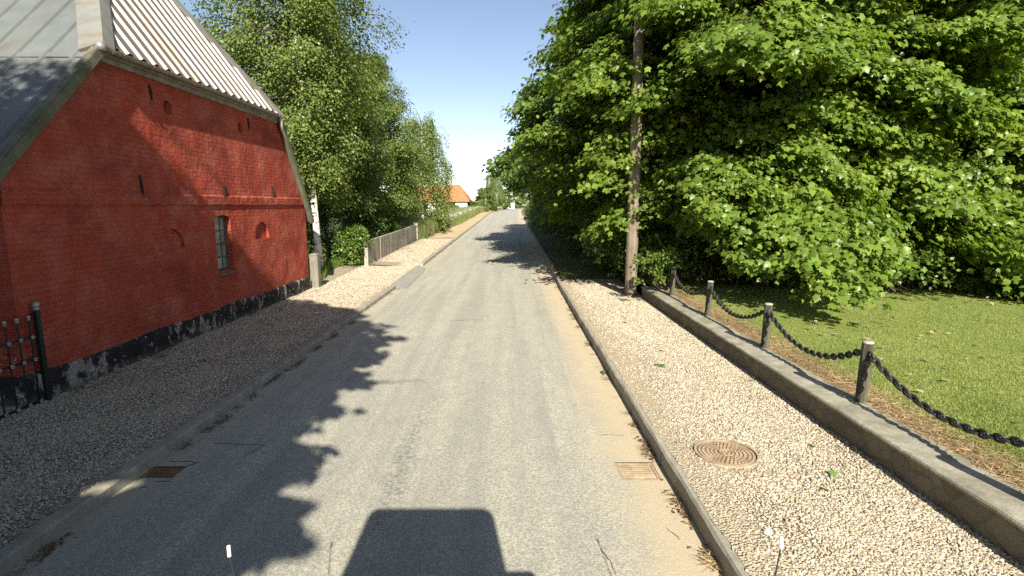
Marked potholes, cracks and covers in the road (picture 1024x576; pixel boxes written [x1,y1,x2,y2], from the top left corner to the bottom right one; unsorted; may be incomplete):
drain grate [615,463,661,480]
drain grate [141,468,184,478]
manhole cover [694,439,760,468]
